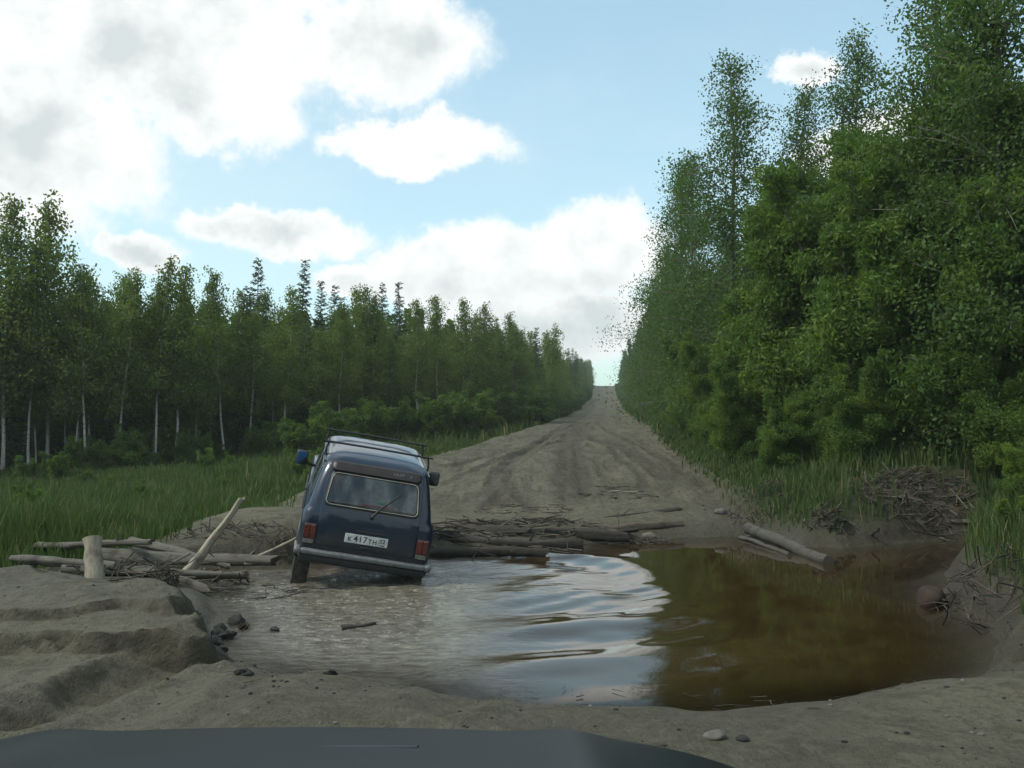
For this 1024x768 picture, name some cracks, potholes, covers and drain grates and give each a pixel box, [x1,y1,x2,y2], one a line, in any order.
pothole [124,511,1024,711]
